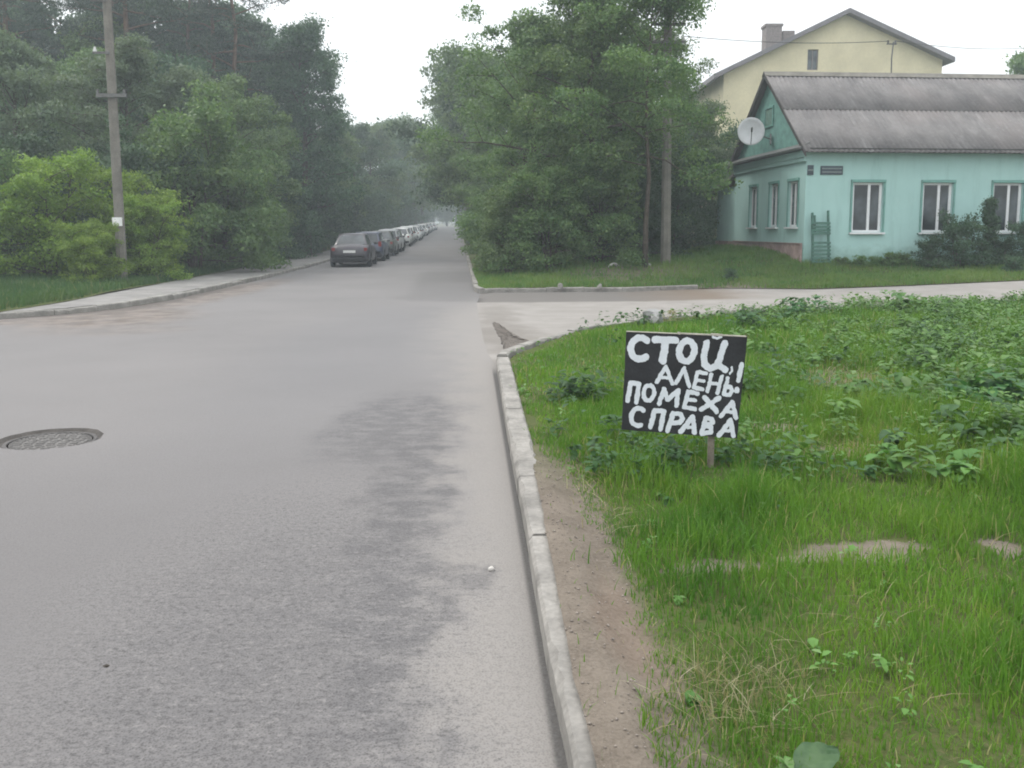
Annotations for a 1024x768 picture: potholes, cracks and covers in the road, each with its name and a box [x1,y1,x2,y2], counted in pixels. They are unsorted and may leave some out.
manhole cover [0,428,104,450]
pothole [492,322,529,350]
